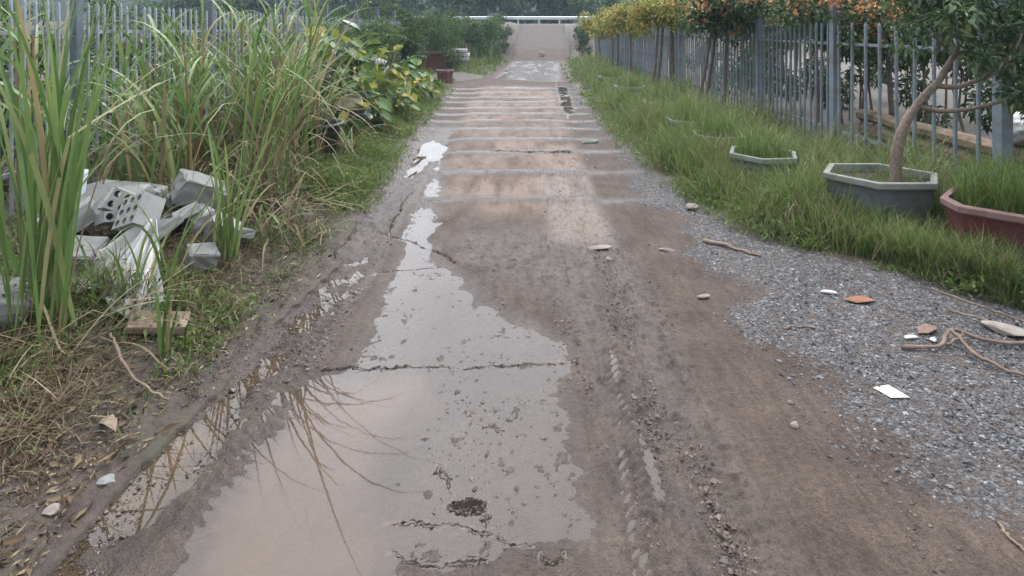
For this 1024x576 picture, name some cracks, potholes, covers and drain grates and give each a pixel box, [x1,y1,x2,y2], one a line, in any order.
crack [377,193,455,273]
crack [322,361,577,372]
pothole [446,498,487,517]
crack [386,519,565,570]
